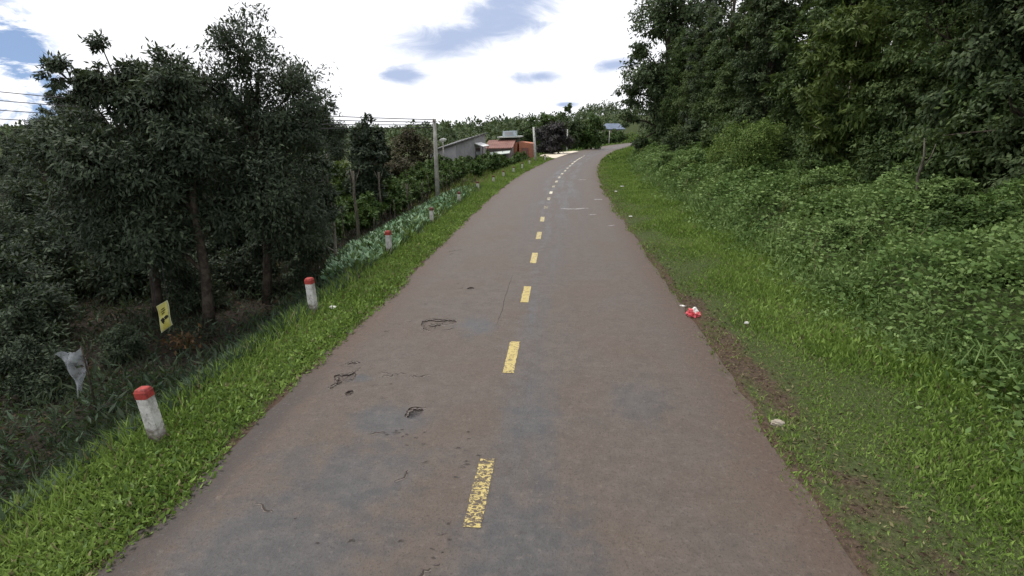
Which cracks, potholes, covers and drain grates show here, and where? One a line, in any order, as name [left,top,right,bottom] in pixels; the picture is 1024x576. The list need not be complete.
pothole [339,388,360,399]
pothole [325,370,361,392]
crack [325,361,431,389]
pothole [398,404,430,423]
pothole [417,317,461,333]
